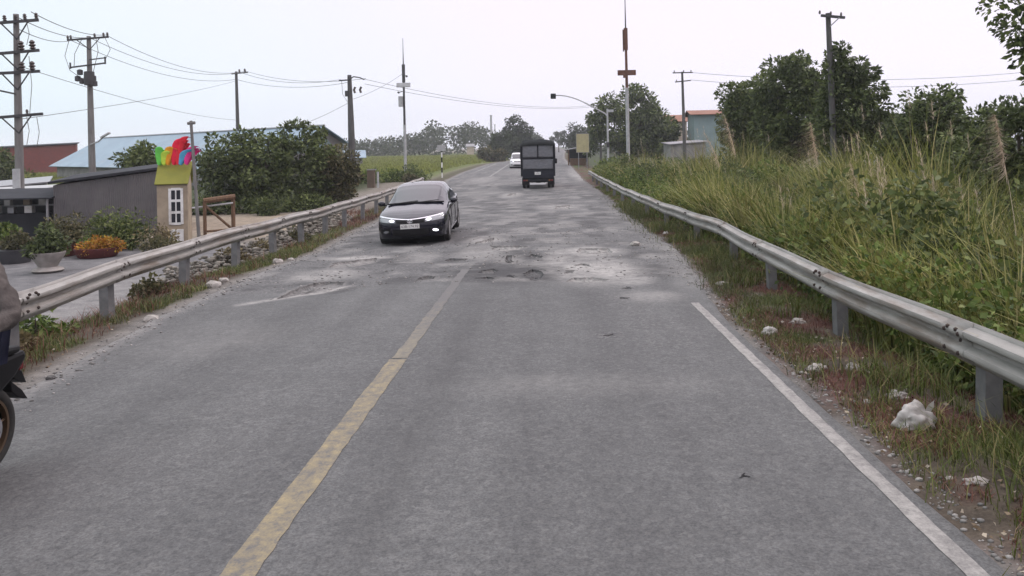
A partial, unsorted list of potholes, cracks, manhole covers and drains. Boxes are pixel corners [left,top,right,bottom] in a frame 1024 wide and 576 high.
pothole [269,280,352,302]
pothole [500,255,517,264]
pothole [324,257,381,269]
pothole [513,269,553,283]
